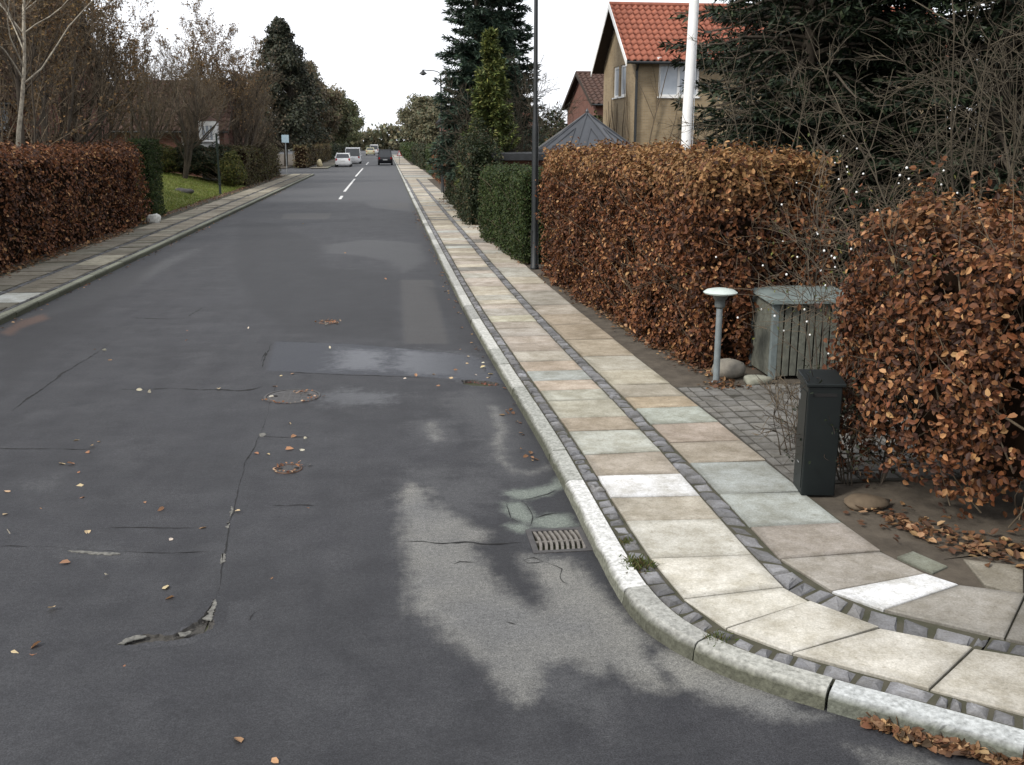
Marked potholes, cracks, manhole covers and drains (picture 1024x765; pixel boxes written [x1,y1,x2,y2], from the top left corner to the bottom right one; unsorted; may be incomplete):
drain grate [525,527,593,554]
pothole [101,594,230,653]
crack [408,541,565,583]
manhole cover [263,389,321,403]
crack [505,490,555,523]
manhole cover [274,464,303,474]
